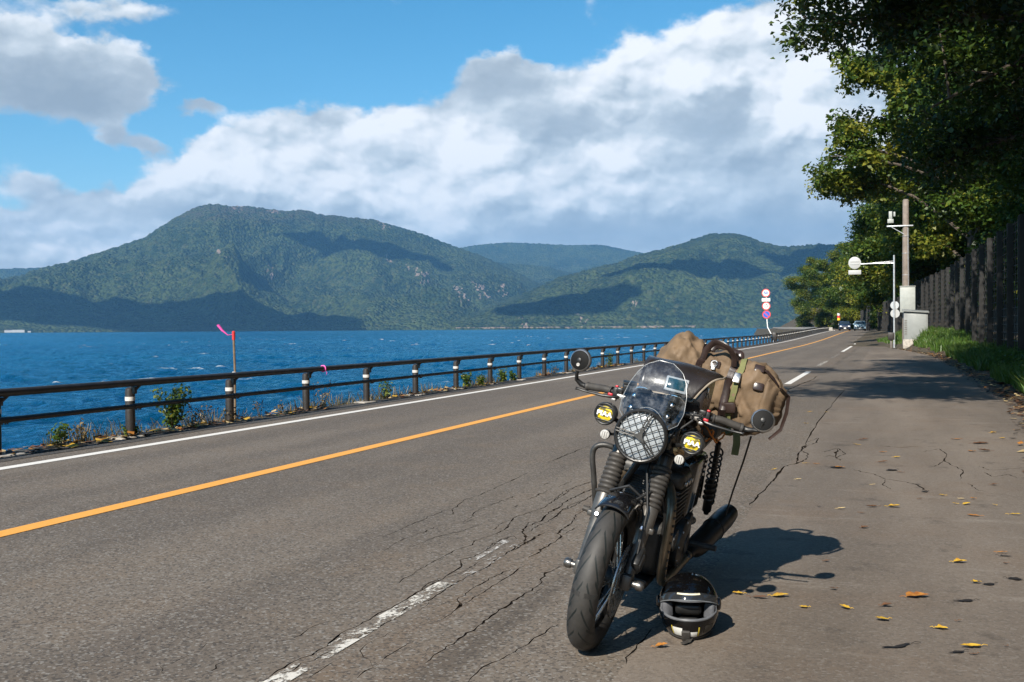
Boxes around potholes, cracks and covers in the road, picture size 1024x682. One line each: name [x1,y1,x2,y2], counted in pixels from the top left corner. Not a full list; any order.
crack [797,438,928,493]
crack [889,446,1017,491]
crack [160,445,592,682]
